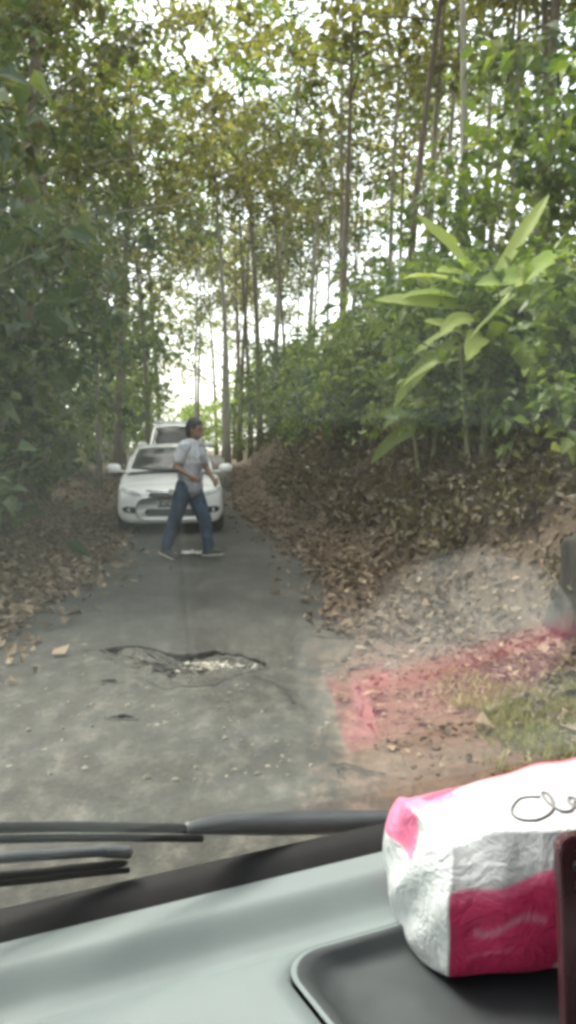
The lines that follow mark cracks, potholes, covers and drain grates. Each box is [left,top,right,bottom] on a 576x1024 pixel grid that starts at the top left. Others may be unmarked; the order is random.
pothole [99,644,272,689]
pothole [107,713,139,721]
